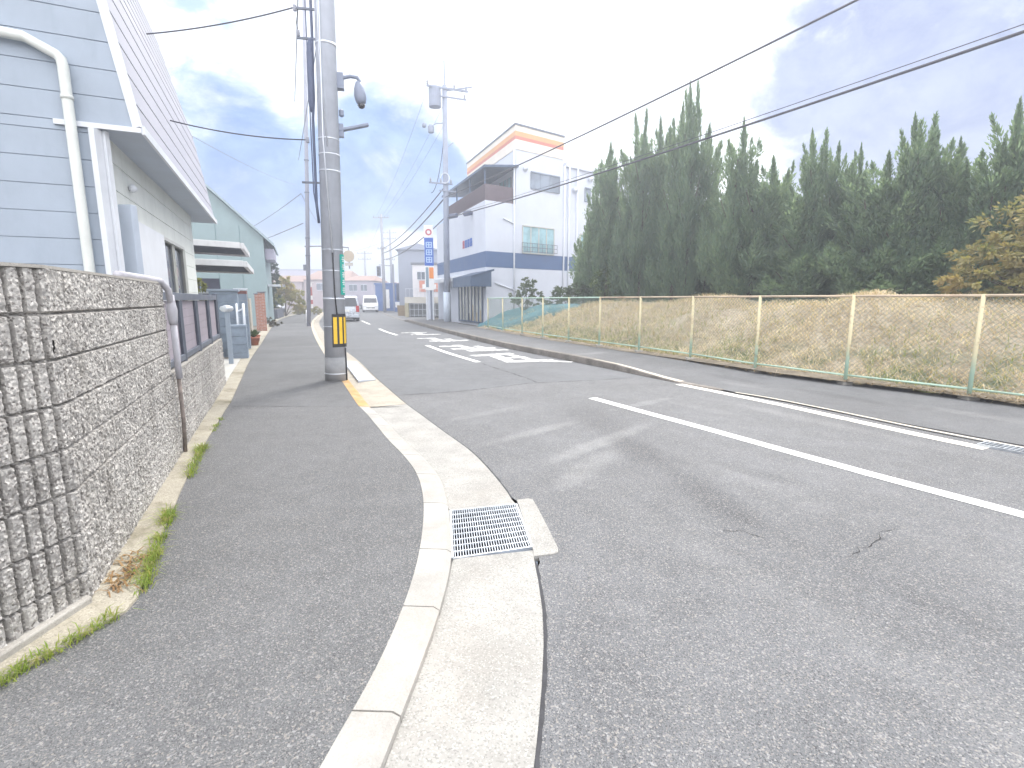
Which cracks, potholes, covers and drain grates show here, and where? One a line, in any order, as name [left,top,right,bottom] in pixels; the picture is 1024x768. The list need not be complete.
drain grate [977,441,1024,455]
drain grate [450,503,533,561]
